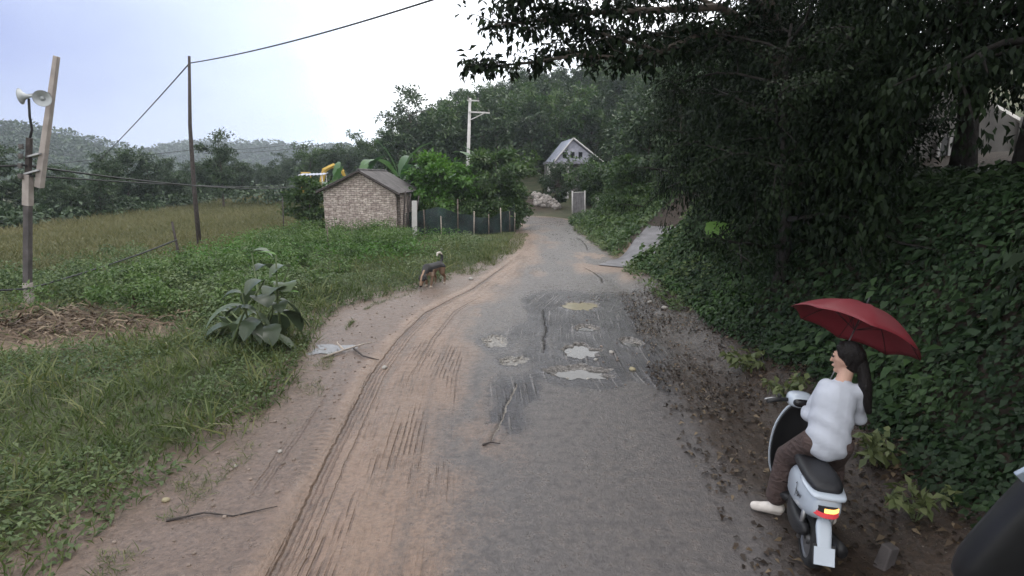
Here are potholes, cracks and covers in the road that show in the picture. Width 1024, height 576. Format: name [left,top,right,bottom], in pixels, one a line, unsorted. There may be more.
pothole [535,362,622,383]
pothole [556,300,604,312]
crack [581,268,608,283]
pothole [553,341,611,362]
pothole [612,335,652,349]
pothole [492,355,536,369]
pothole [568,323,607,334]
crack [536,309,554,353]
pothole [476,333,514,350]
crack [480,382,526,442]
